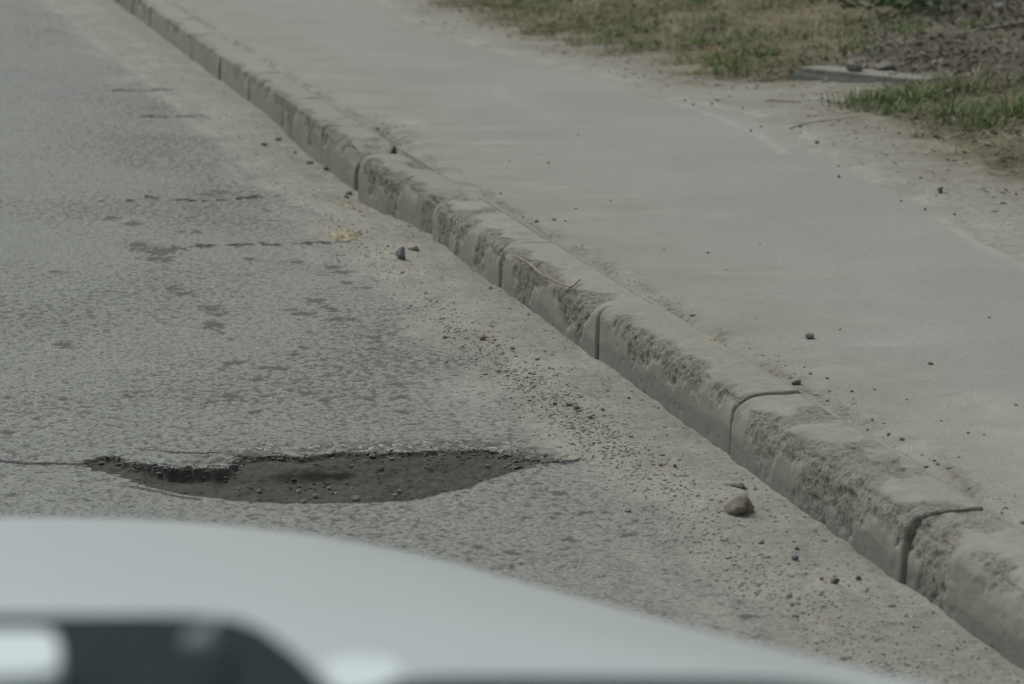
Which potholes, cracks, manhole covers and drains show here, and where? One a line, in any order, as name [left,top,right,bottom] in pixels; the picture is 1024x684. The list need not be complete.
crack [0,459,85,467]
pothole [82,450,542,504]
